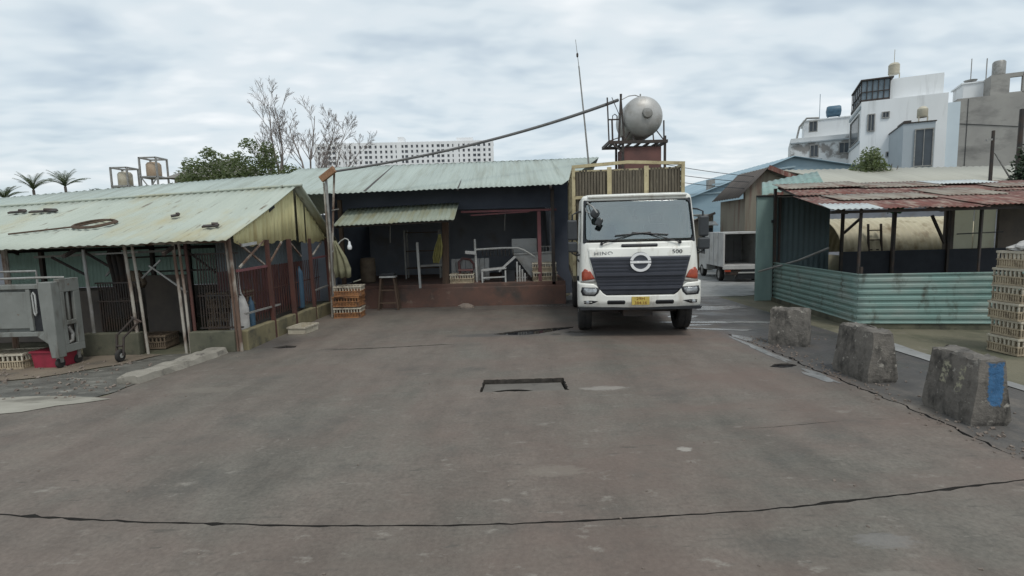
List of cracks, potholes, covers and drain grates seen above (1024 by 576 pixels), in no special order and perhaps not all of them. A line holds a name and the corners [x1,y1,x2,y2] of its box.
crack [0,479,1024,527]
manhole cover [480,378,569,392]
pothole [497,327,573,335]
